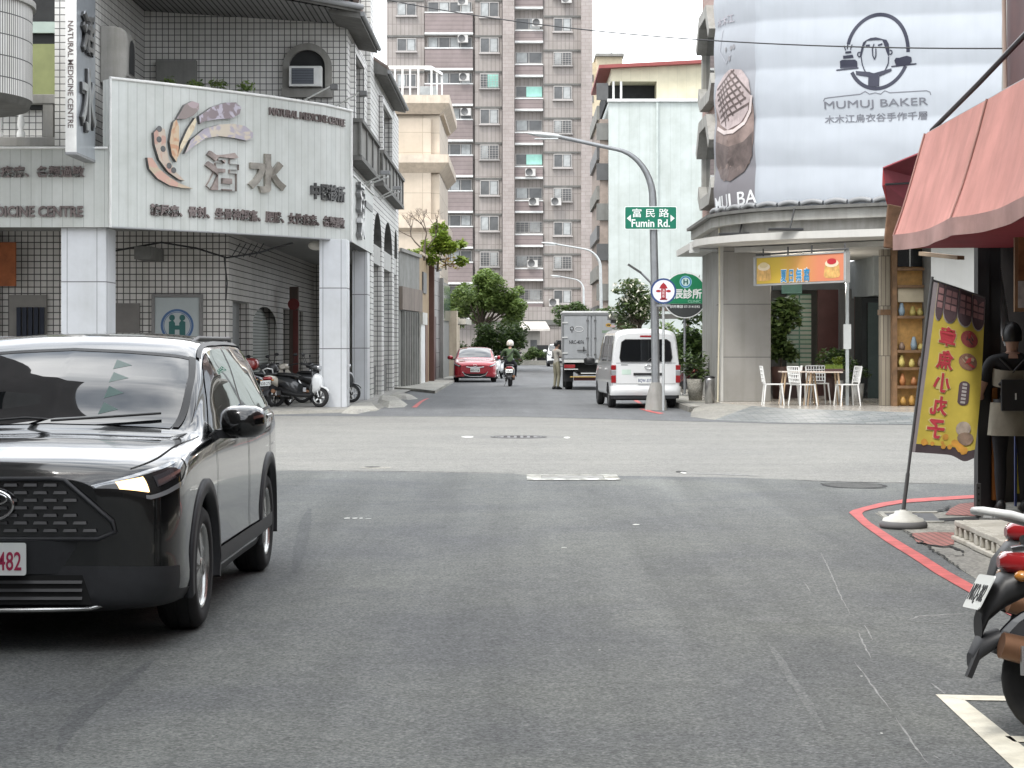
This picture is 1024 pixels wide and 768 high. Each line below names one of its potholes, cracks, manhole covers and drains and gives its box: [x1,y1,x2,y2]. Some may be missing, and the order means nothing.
crack [904,529,966,572]
crack [796,554,952,760]
